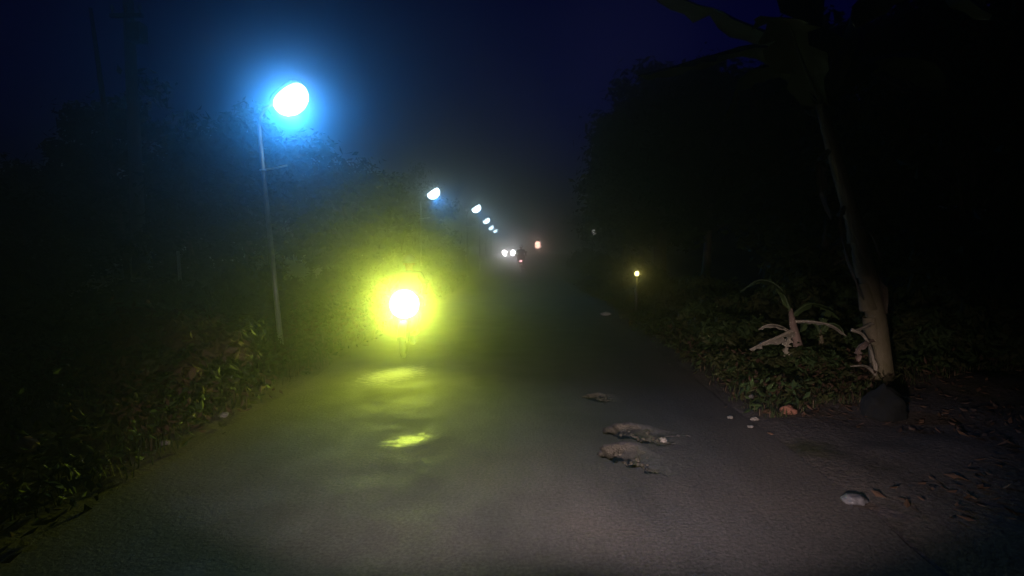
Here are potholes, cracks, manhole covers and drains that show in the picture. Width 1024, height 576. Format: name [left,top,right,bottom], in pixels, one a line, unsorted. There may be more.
pothole [582,392,627,403]
pothole [597,442,683,477]
pothole [602,422,695,447]
